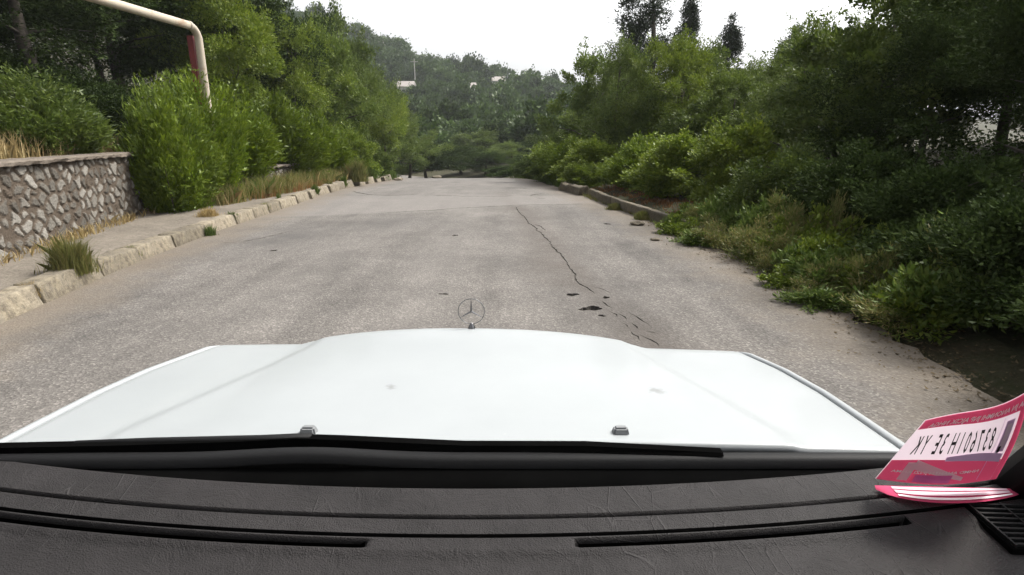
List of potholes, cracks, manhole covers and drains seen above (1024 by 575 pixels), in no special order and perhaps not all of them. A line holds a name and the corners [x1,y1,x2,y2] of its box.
crack [516,188,659,345]
